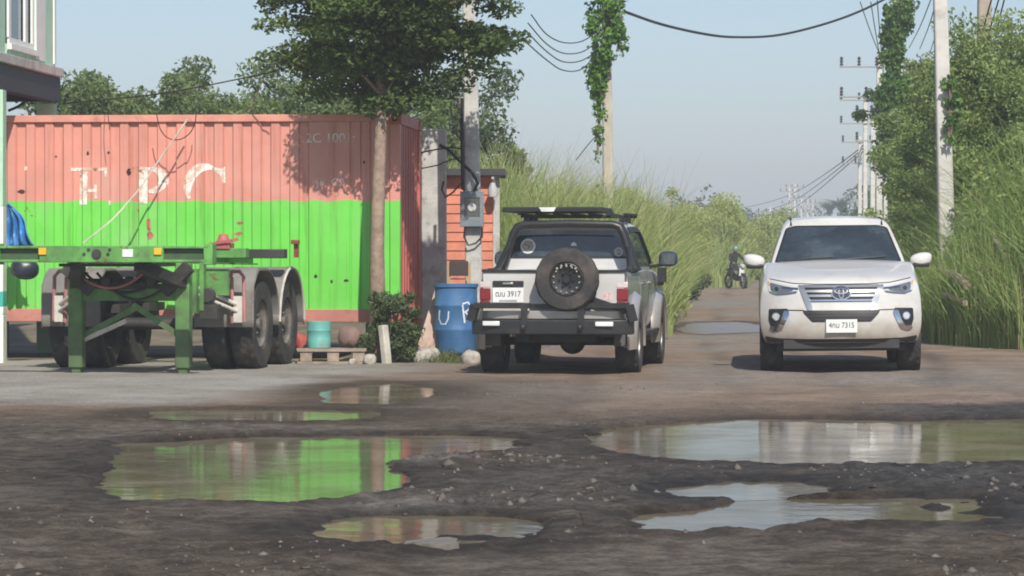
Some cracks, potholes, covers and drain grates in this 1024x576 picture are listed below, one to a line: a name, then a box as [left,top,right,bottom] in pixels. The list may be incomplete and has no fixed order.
pothole [108,405,419,423]
pothole [636,473,877,502]
pothole [66,429,549,505]
pothole [569,483,1024,534]
pothole [294,381,466,406]
pothole [268,503,586,550]
pothole [554,414,1024,466]
pothole [673,320,760,335]
